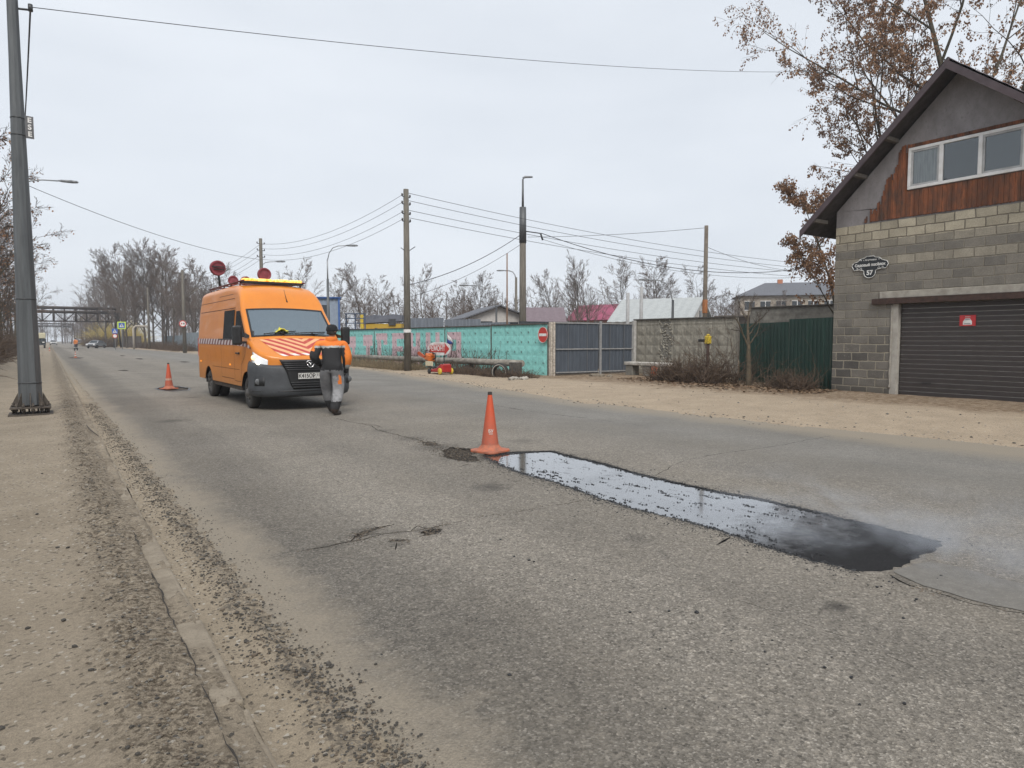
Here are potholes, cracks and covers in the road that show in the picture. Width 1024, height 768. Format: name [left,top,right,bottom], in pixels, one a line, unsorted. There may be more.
pothole [483,450,943,572]
crack [297,499,584,552]
